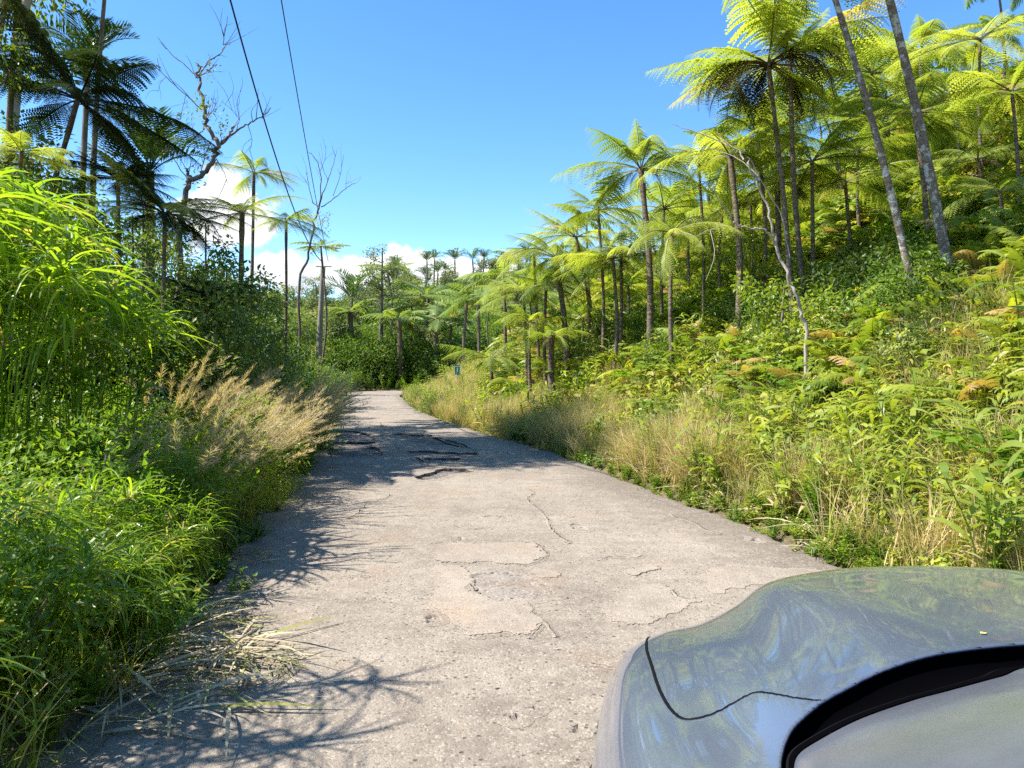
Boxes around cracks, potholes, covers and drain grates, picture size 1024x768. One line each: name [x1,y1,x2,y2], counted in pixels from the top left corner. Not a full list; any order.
pothole [400,449,487,457]
crack [433,489,647,566]
pothole [326,430,383,442]
pothole [386,433,481,450]
pothole [318,440,391,459]
pothole [408,467,480,482]
crack [670,588,699,603]
crack [642,498,722,534]
